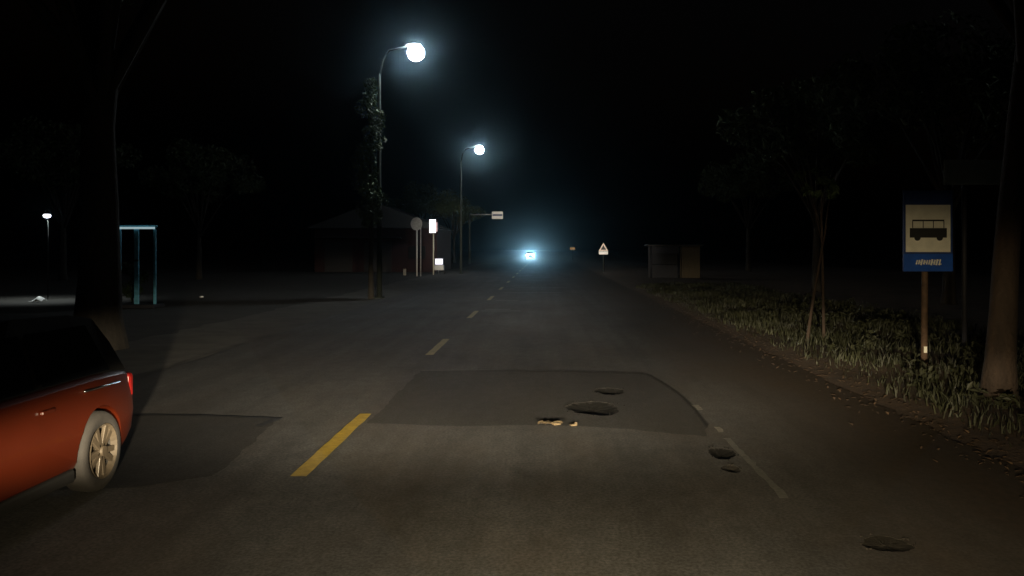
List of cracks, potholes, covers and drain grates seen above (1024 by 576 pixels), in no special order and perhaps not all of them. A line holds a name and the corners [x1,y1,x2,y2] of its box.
pothole [860,533,916,552]
pothole [565,400,627,416]
pothole [721,463,742,473]
pothole [708,446,739,460]
